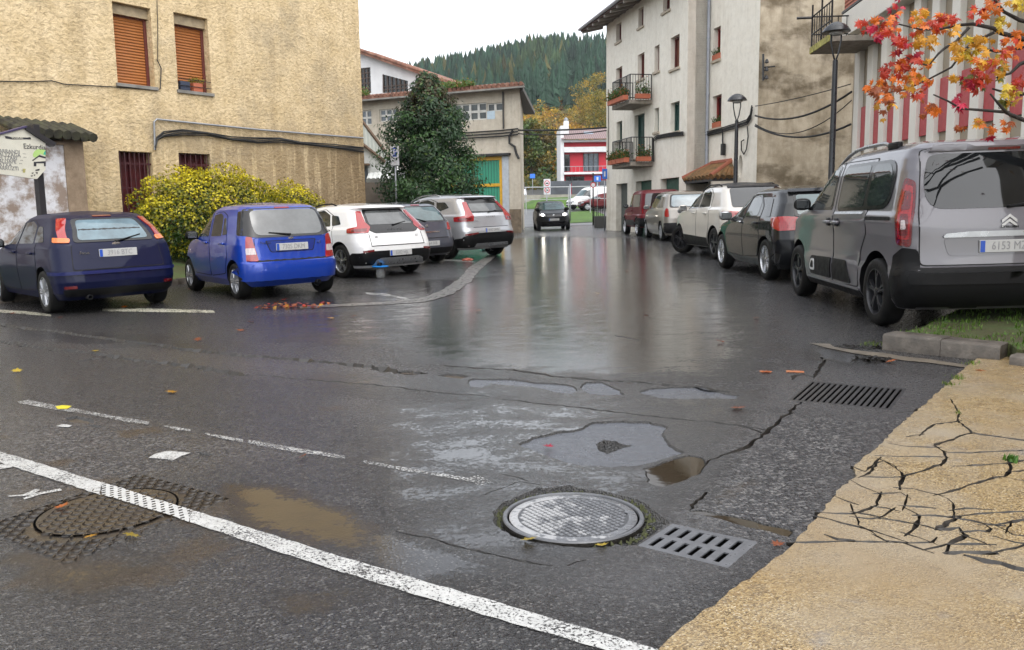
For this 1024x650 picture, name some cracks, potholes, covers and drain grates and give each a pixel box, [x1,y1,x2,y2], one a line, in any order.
pothole [639,387,740,399]
drain grate [789,381,906,410]
manhole cover [0,474,226,563]
pothole [643,455,706,487]
pothole [468,378,577,394]
crack [791,357,831,380]
crack [260,365,799,511]
drain grate [638,524,757,568]
pothole [519,420,685,467]
manhole cover [502,492,644,548]
pothole [580,382,624,395]
